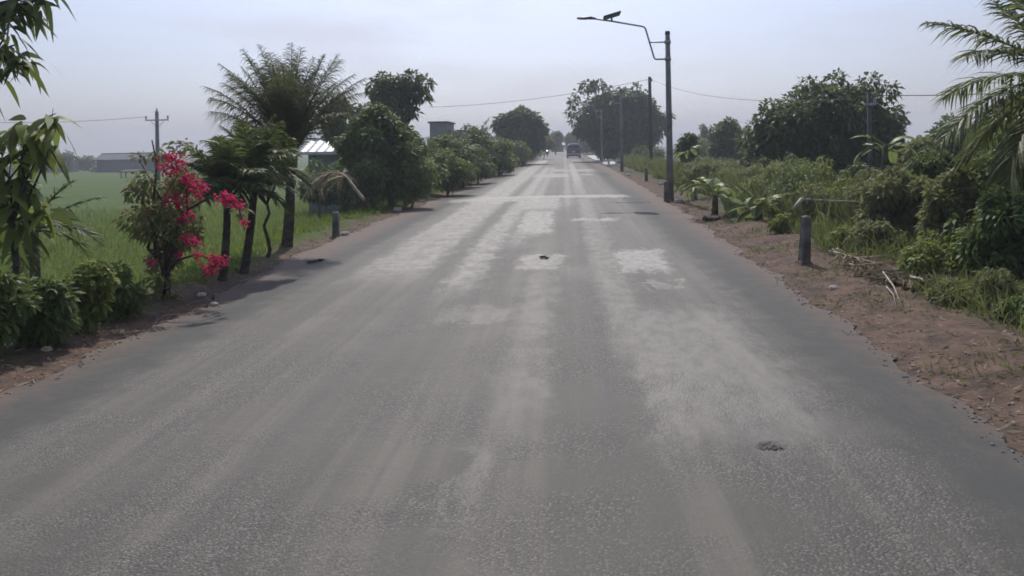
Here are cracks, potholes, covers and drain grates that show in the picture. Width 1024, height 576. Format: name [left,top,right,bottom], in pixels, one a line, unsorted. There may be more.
pothole [755,441,793,451]
